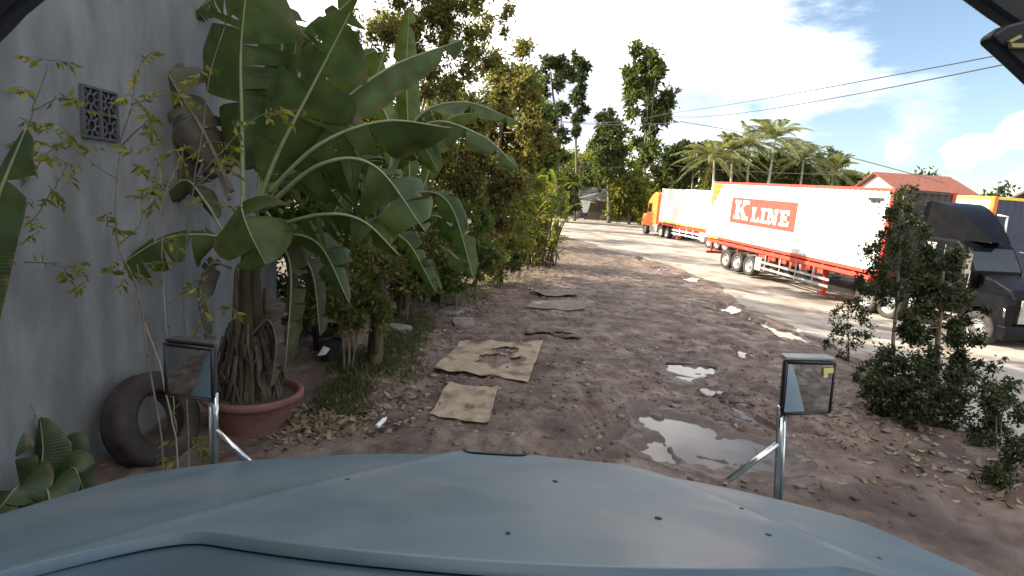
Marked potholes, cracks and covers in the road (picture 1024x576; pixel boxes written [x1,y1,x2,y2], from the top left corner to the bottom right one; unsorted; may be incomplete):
pothole [653,353,729,386]
pothole [616,401,818,484]
